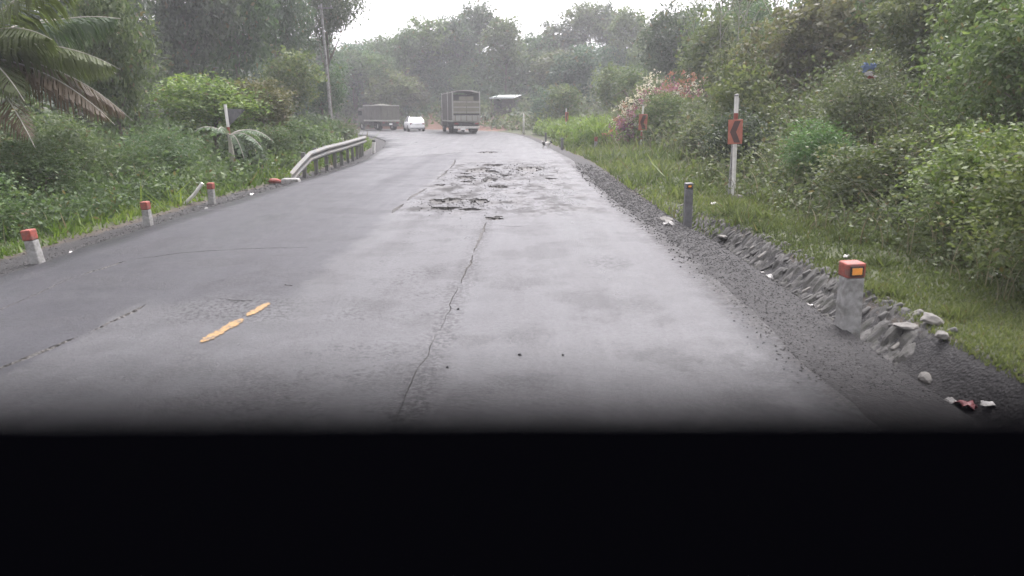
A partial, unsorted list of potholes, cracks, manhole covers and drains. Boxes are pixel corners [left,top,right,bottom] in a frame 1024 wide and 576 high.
crack [409,223,518,386]
crack [0,305,145,369]
